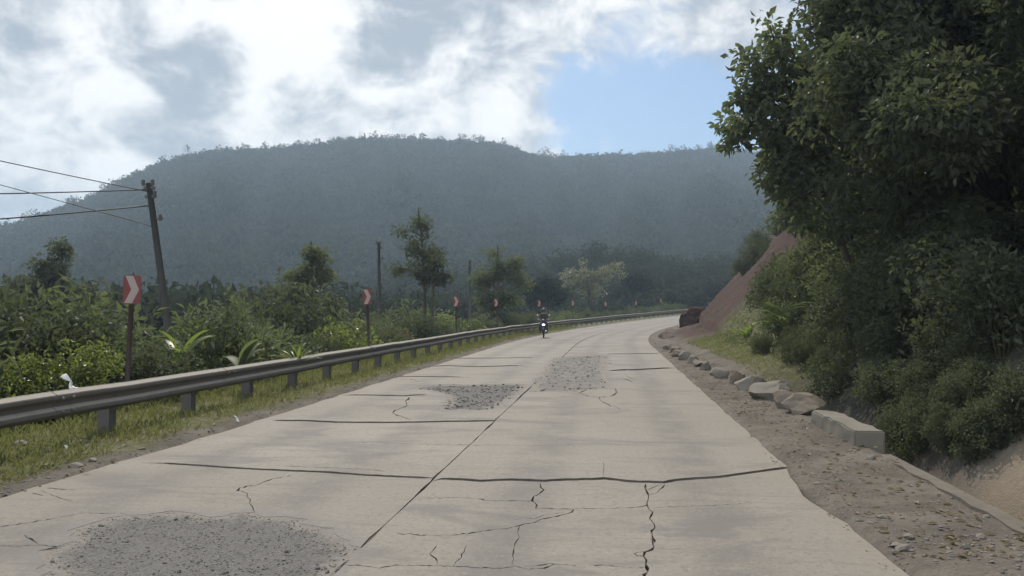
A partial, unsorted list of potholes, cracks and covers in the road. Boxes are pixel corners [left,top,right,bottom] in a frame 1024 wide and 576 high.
pothole [412,384,527,410]
crack [236,466,380,512]
pothole [531,355,614,392]
crack [345,484,741,576]
pothole [36,511,361,576]
crack [534,375,632,409]
